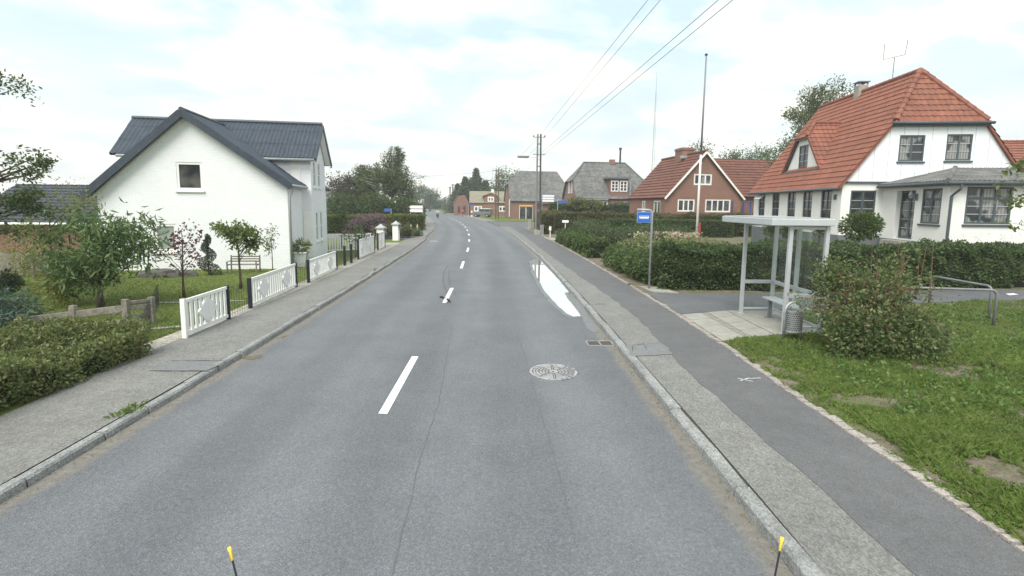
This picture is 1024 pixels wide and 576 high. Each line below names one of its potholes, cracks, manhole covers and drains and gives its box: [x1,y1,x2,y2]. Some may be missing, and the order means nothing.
crack [392,326,453,575]
crack [521,344,575,542]
manhole cover [530,364,579,380]
